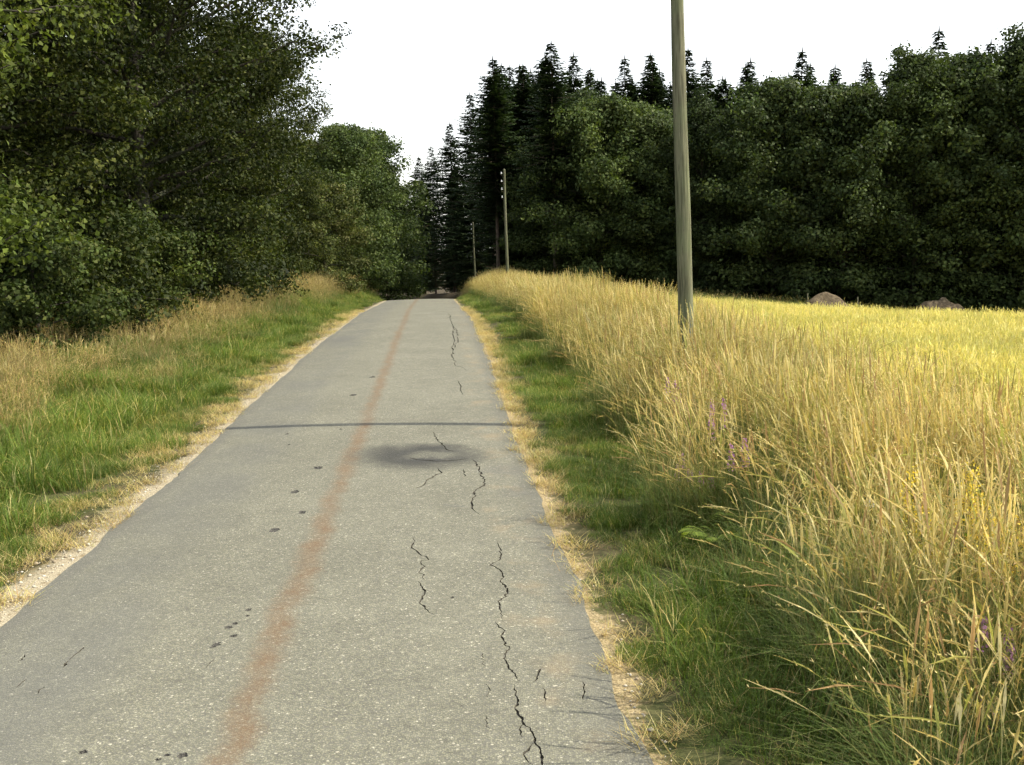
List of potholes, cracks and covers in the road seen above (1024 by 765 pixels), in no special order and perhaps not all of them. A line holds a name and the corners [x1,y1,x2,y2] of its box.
crack [412,434,486,514]
crack [481,543,546,765]
crack [411,536,433,614]
crack [448,314,463,394]
